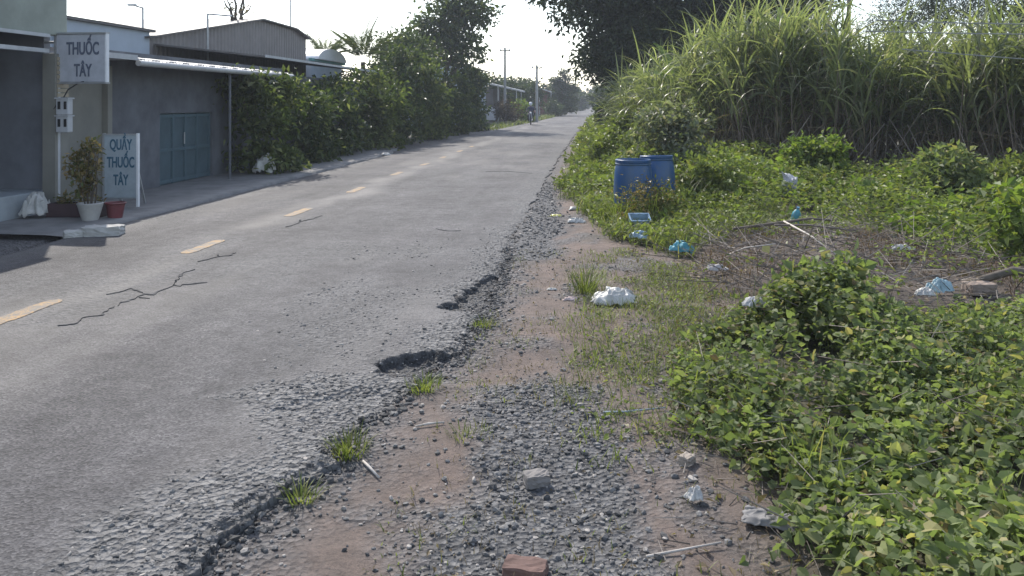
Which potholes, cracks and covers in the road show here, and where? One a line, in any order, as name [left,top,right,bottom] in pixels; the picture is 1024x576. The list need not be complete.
pothole [435,274,500,314]
crack [58,253,235,326]
pothole [370,348,458,381]
